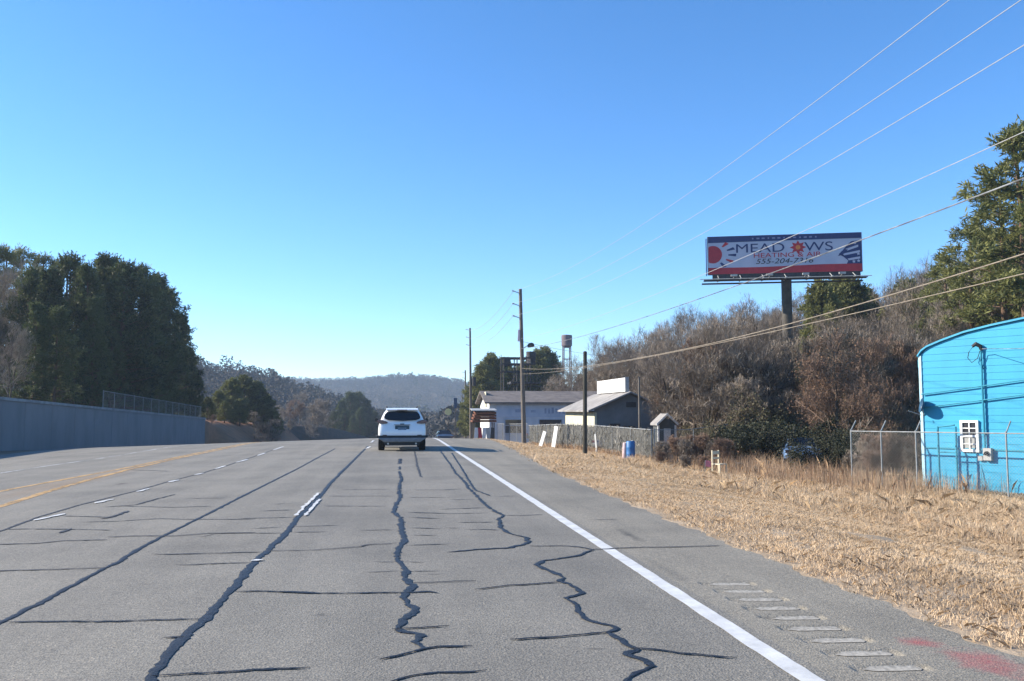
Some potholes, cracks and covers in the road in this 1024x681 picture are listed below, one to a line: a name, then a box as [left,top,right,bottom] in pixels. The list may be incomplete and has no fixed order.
crack [59,494,175,533]
crack [265,543,390,551]
